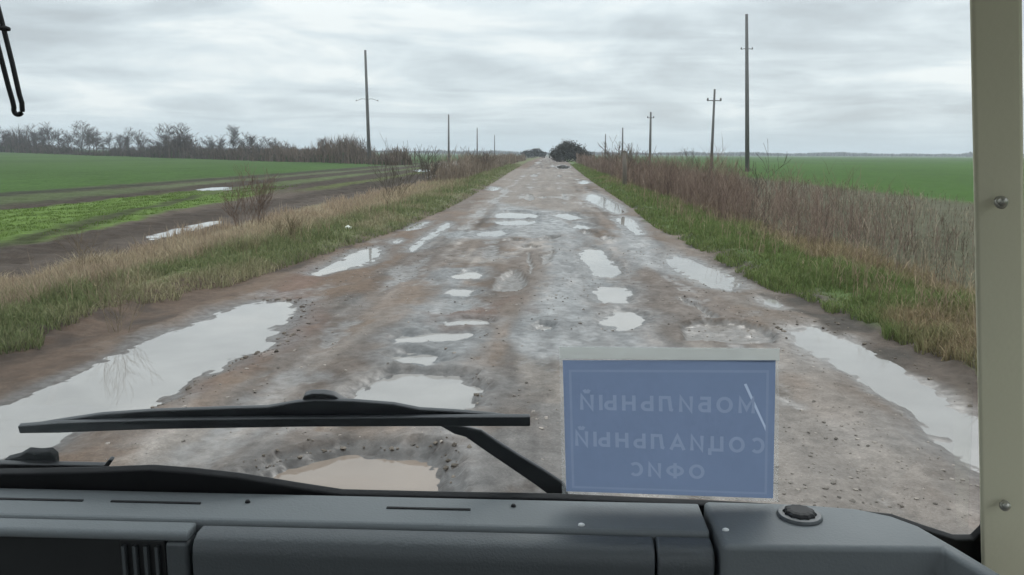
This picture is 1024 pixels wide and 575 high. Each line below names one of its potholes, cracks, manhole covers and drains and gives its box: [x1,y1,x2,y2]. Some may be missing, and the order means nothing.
pothole [586,284,640,303]
pothole [594,306,653,331]
pothole [574,246,625,278]
pothole [440,285,482,297]
pothole [490,210,542,225]
pothole [489,268,532,292]
pothole [384,327,480,343]
pothole [236,434,476,492]
pothole [342,362,494,410]
pothole [380,345,457,369]
